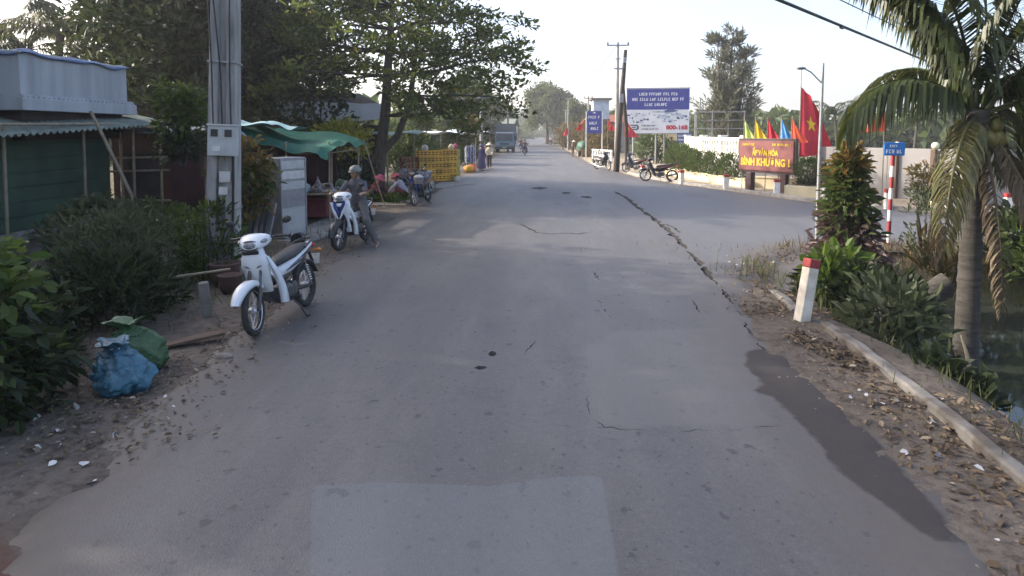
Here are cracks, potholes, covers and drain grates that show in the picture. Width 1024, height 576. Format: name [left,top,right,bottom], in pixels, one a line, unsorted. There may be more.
crack [614,191,765,350]
